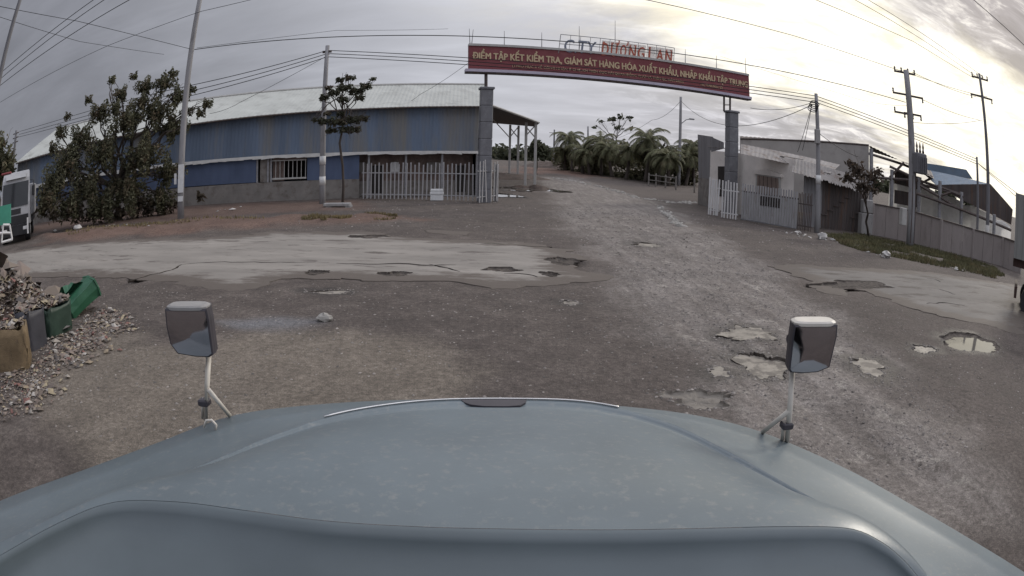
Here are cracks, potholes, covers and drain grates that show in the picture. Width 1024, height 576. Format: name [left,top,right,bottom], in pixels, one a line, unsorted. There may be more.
pothole [654,388,734,410]
pothole [730,352,787,380]
crack [128,262,302,283]
crack [339,263,460,272]
pothole [543,257,581,266]
pothole [939,331,1001,353]
pothole [912,345,937,354]
pothole [715,324,778,341]
pothole [806,280,892,291]
pothole [852,357,885,377]
pothole [709,366,730,377]
